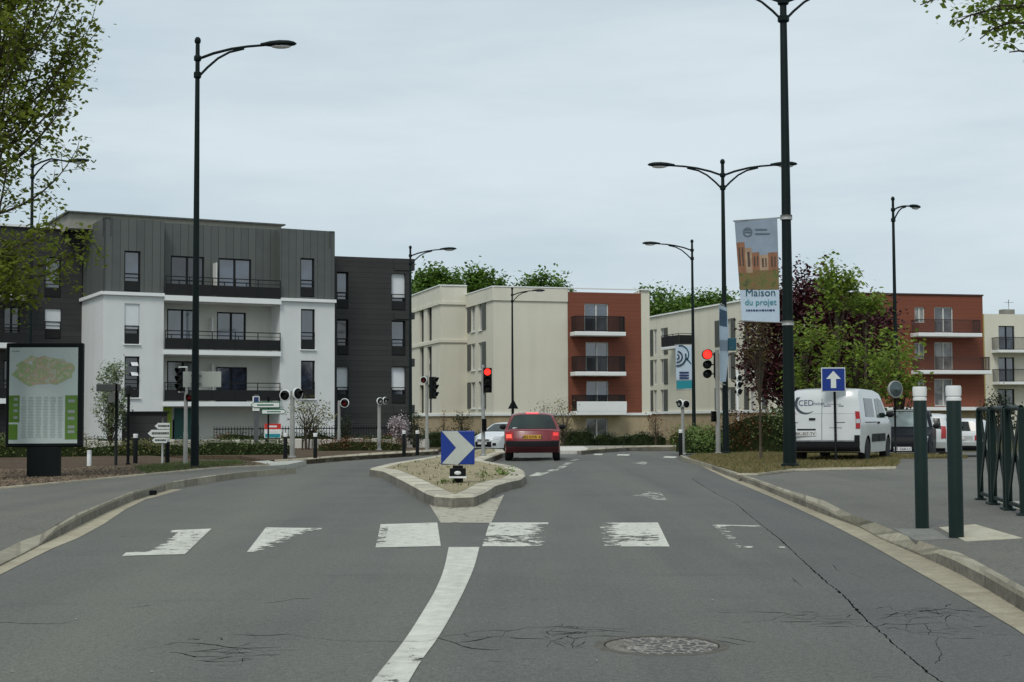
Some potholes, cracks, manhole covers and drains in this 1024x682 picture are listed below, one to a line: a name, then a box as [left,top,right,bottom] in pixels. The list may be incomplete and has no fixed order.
crack [138,633,301,665]
manhole cover [594,635,730,656]
crack [304,624,756,662]
crack [722,604,994,664]
